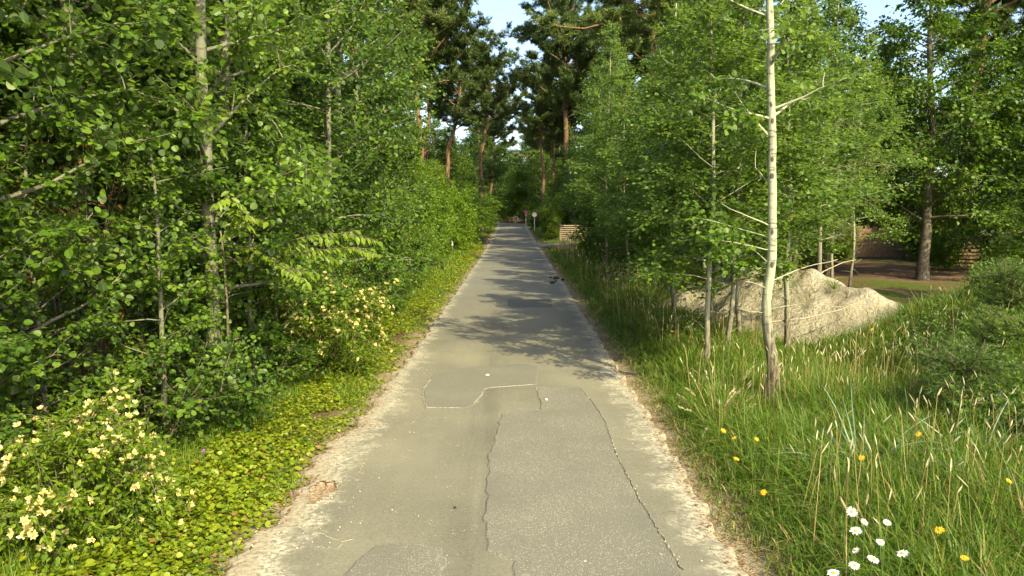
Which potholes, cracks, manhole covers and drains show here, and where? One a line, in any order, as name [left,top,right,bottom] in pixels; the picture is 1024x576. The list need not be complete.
crack [580,388,684,570]
